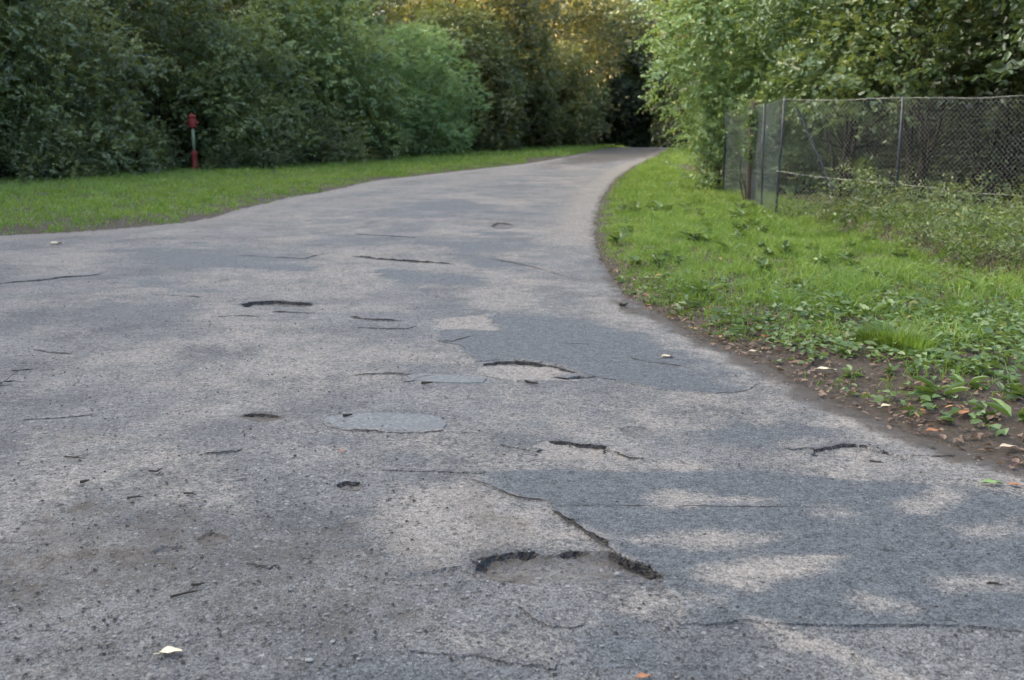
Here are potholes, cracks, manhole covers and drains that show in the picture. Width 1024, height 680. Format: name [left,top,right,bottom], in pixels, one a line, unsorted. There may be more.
pothole [477,361,584,381]
pothole [239,414,284,422]
pothole [474,551,663,586]
crack [352,256,457,265]
pothole [533,441,607,461]
crack [382,443,627,552]
crack [0,273,99,284]
pothole [333,481,365,491]
pothole [240,300,314,310]
